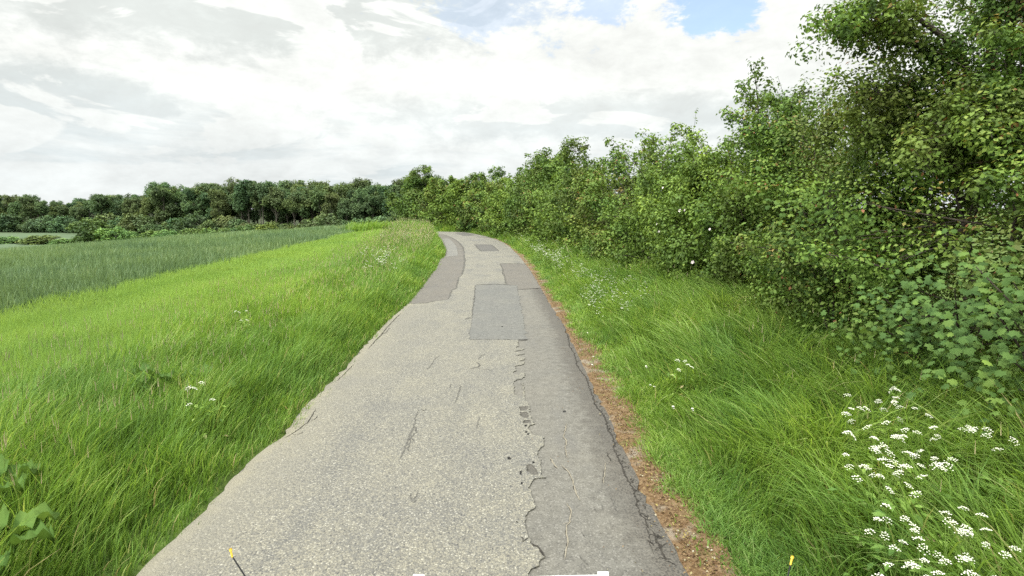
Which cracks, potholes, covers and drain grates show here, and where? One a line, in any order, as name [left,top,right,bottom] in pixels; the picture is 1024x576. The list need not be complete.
crack [400,408,426,458]
crack [550,329,674,566]
crack [429,354,489,428]
